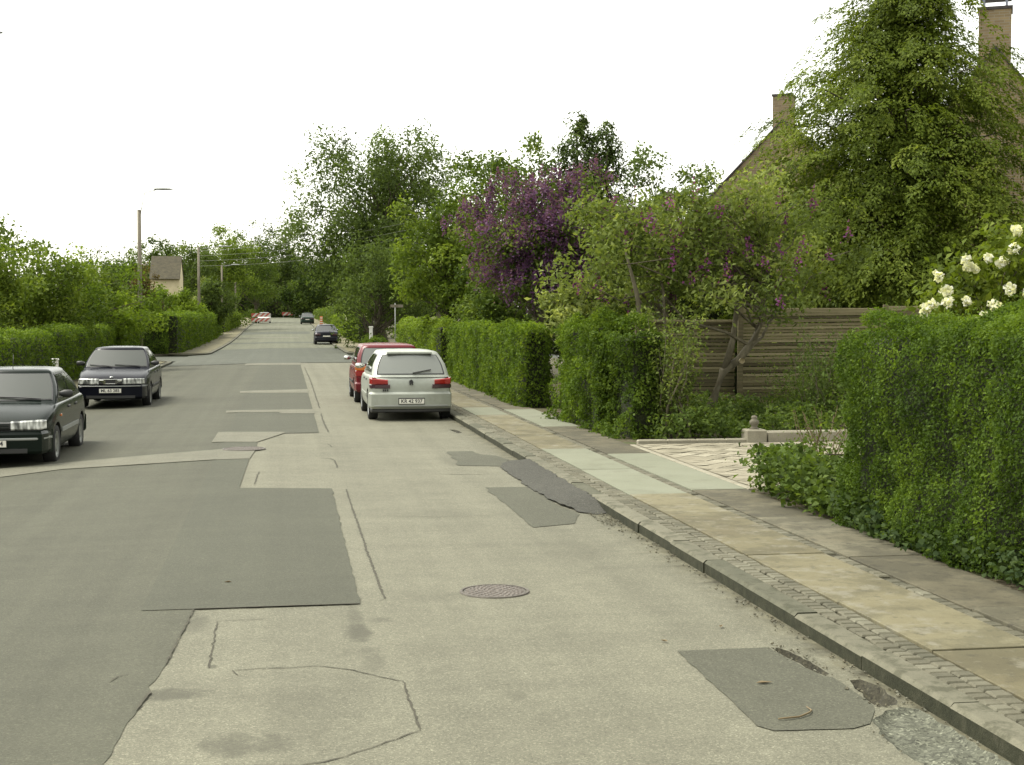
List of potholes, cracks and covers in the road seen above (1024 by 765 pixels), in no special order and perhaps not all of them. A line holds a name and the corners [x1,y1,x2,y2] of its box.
pothole [850,679,898,707]
pothole [773,648,829,676]
pothole [872,707,1012,765]
manhole cover [460,584,530,598]
crack [208,618,421,765]
crack [346,489,386,601]
